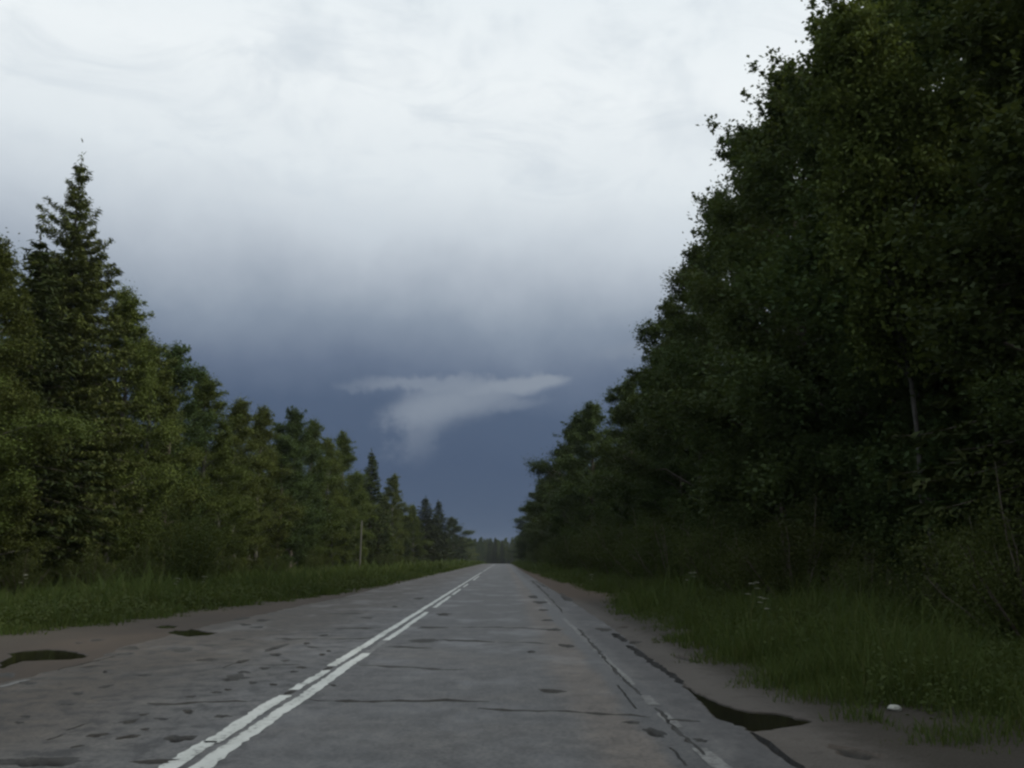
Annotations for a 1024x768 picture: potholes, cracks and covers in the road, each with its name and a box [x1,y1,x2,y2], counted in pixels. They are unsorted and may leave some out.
crack [310,581,705,766]
pothole [163,735,197,743]
